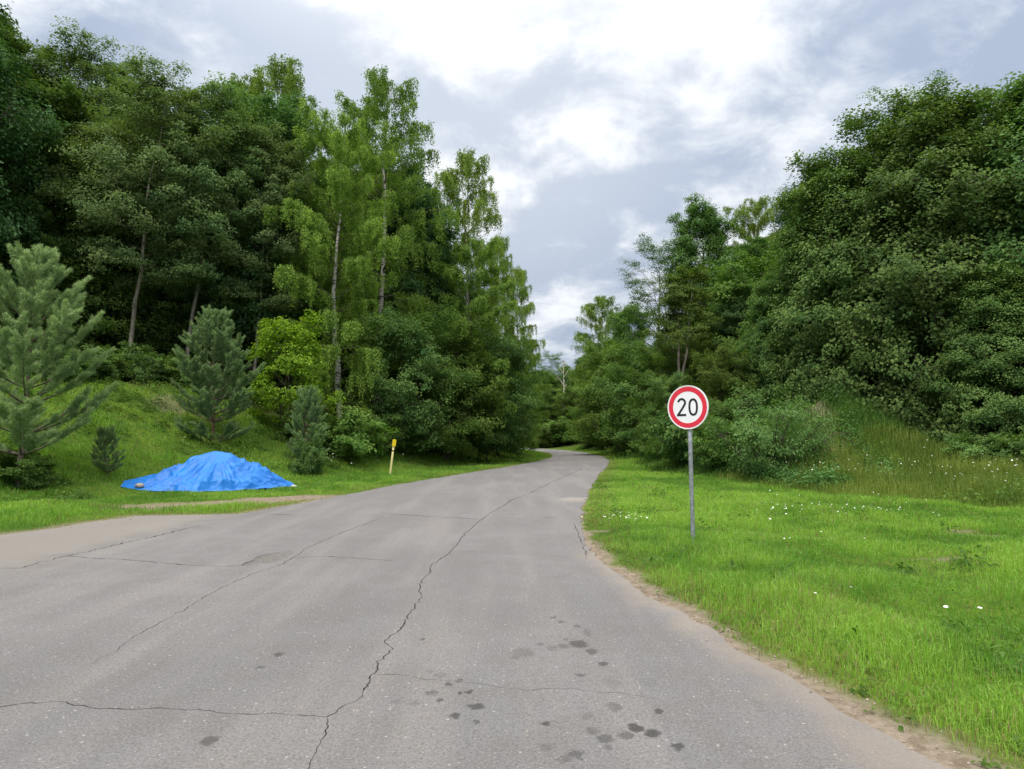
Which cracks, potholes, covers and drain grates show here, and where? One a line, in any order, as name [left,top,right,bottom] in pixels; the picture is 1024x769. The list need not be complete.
crack [1,469,655,769]
